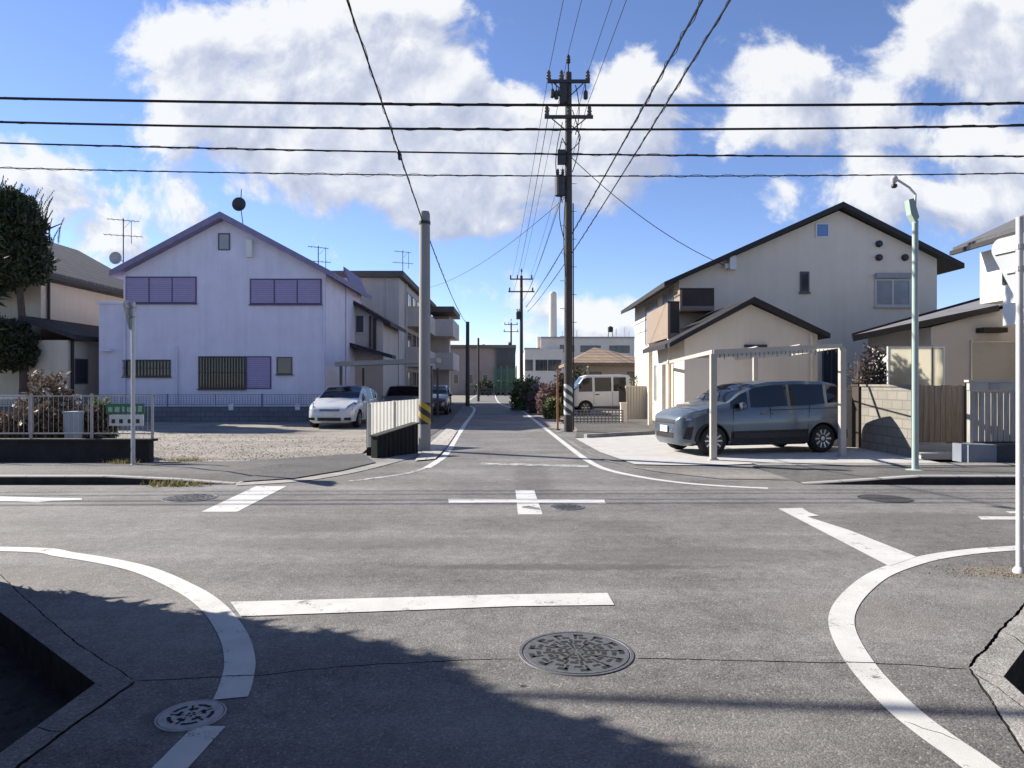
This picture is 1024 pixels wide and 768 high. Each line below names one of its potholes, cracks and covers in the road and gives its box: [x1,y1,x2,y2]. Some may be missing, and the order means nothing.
manhole cover [519,631,634,676]
manhole cover [154,700,227,732]
manhole cover [857,494,914,503]
manhole cover [162,494,218,502]
